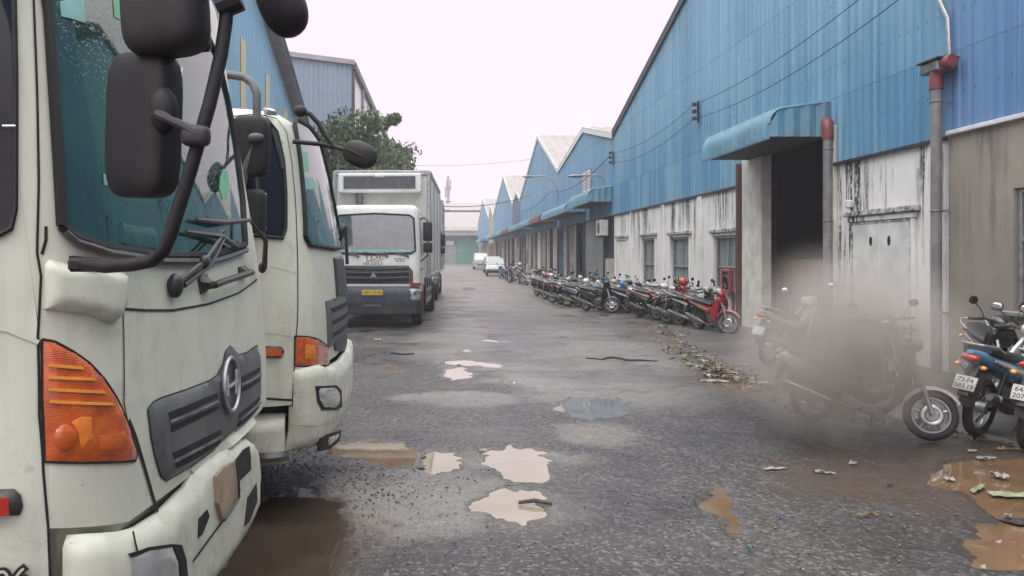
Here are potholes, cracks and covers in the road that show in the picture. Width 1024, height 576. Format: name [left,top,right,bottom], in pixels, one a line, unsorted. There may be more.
pothole [915,454,1024,527]
pothole [217,481,361,576]
pothole [949,518,1024,575]
pothole [543,396,636,422]
pothole [693,478,753,541]
